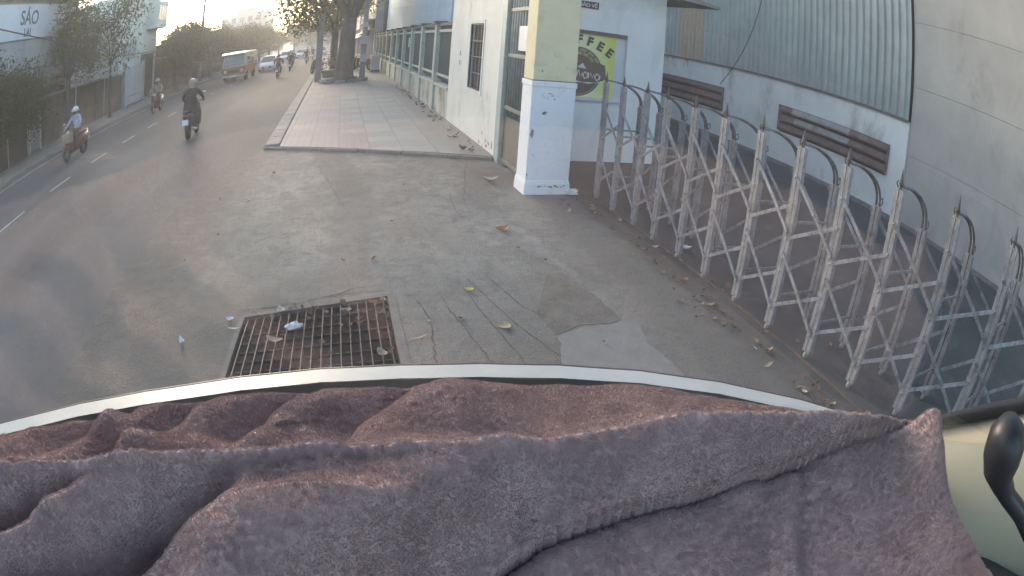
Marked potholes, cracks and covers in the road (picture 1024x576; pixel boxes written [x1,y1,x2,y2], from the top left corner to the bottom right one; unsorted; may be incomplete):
drain grate [219,293,411,379]
crack [414,275,564,363]
